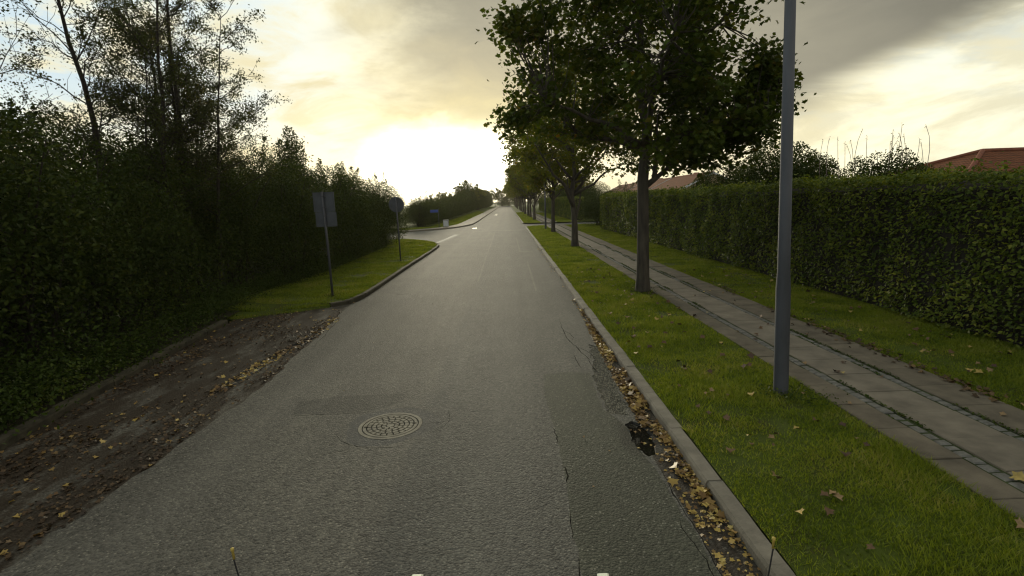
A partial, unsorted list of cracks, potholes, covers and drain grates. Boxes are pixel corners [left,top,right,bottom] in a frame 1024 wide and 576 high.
pothole [625,421,656,457]
crack [661,469,722,576]
crack [553,428,580,576]
manhole cover [358,413,423,440]
crack [560,323,596,371]
